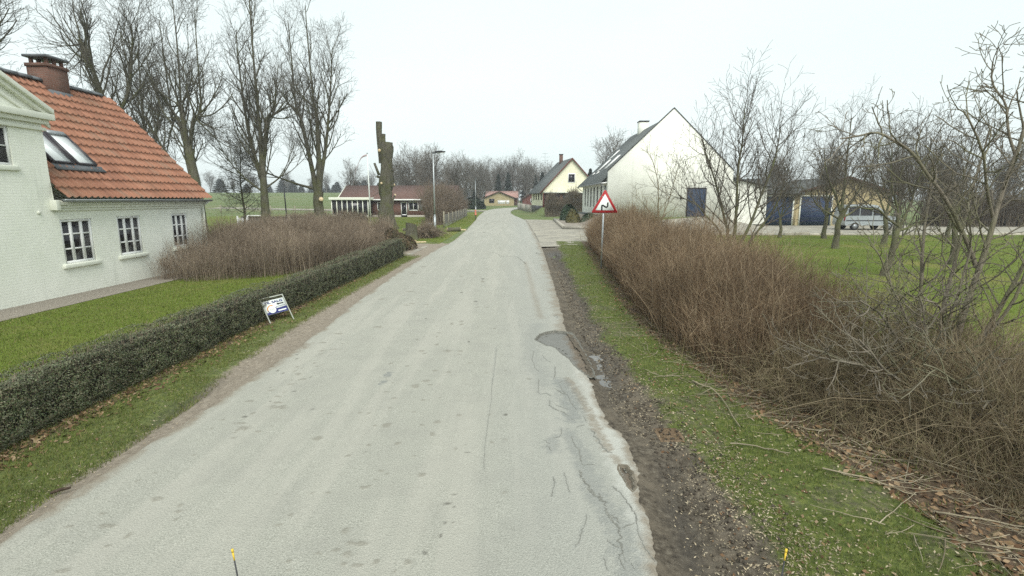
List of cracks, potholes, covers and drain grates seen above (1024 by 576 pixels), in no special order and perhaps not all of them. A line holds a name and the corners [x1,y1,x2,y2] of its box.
pothole [534,330,597,380]
crack [531,351,655,569]
pothole [617,464,637,493]
